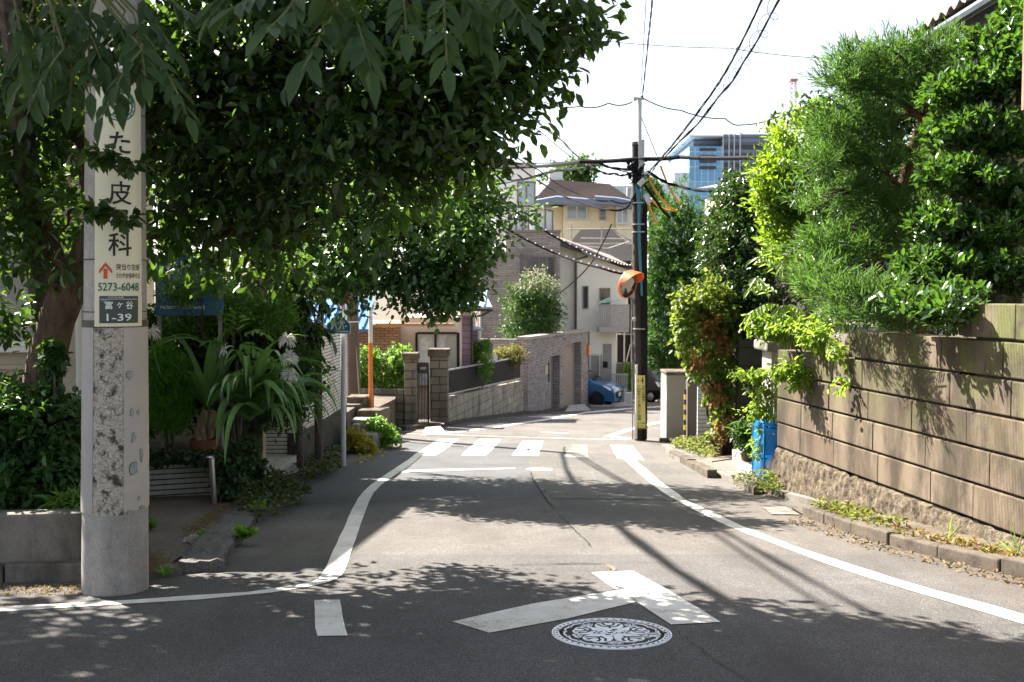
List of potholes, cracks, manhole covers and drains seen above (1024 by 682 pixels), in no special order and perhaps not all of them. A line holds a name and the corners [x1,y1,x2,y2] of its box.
manhole cover [552,618,672,650]
crack [530,472,591,546]
